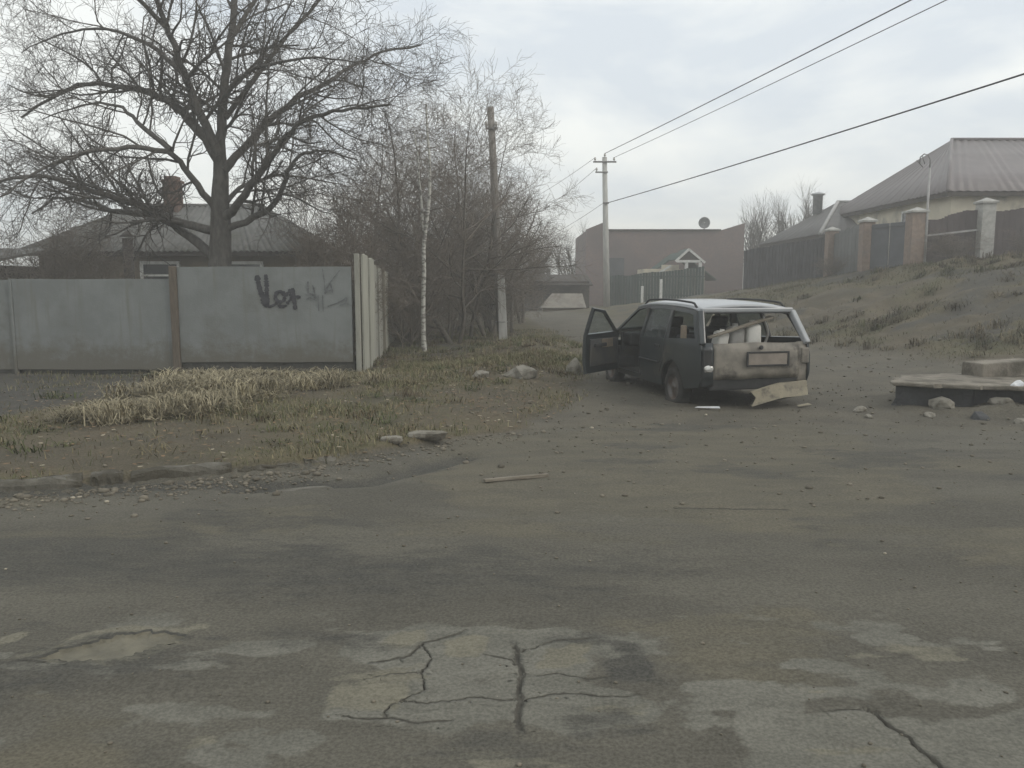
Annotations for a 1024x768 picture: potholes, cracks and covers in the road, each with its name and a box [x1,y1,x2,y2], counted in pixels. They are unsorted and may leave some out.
pothole [20,626,198,666]
crack [323,625,644,740]
crack [818,702,957,768]
